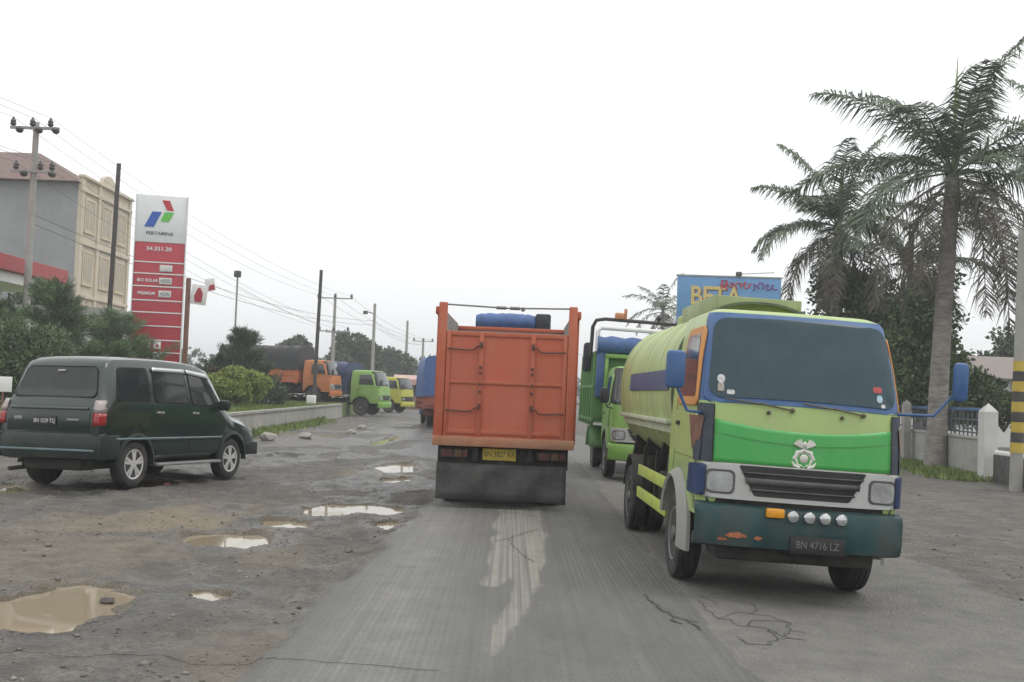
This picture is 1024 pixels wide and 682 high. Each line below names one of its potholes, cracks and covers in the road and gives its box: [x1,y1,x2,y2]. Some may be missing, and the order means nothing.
crack [7,651,439,671]
pothole [168,528,283,549]
pothole [372,518,406,533]
pothole [182,586,241,601]
crack [644,594,804,645]
pothole [257,515,322,528]
pothole [365,435,404,446]
pothole [374,461,427,473]
pothole [0,575,152,634]
pothole [296,501,412,517]
